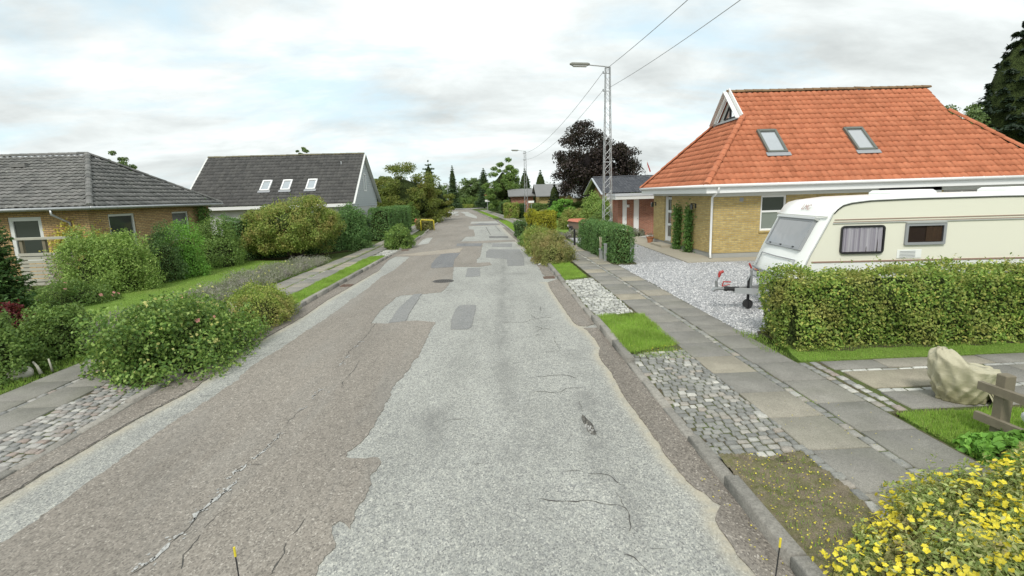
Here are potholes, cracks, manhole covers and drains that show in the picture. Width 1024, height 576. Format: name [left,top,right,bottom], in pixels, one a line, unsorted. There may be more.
pothole [581,414,597,435]
crack [181,508,227,569]
crack [541,470,631,531]
